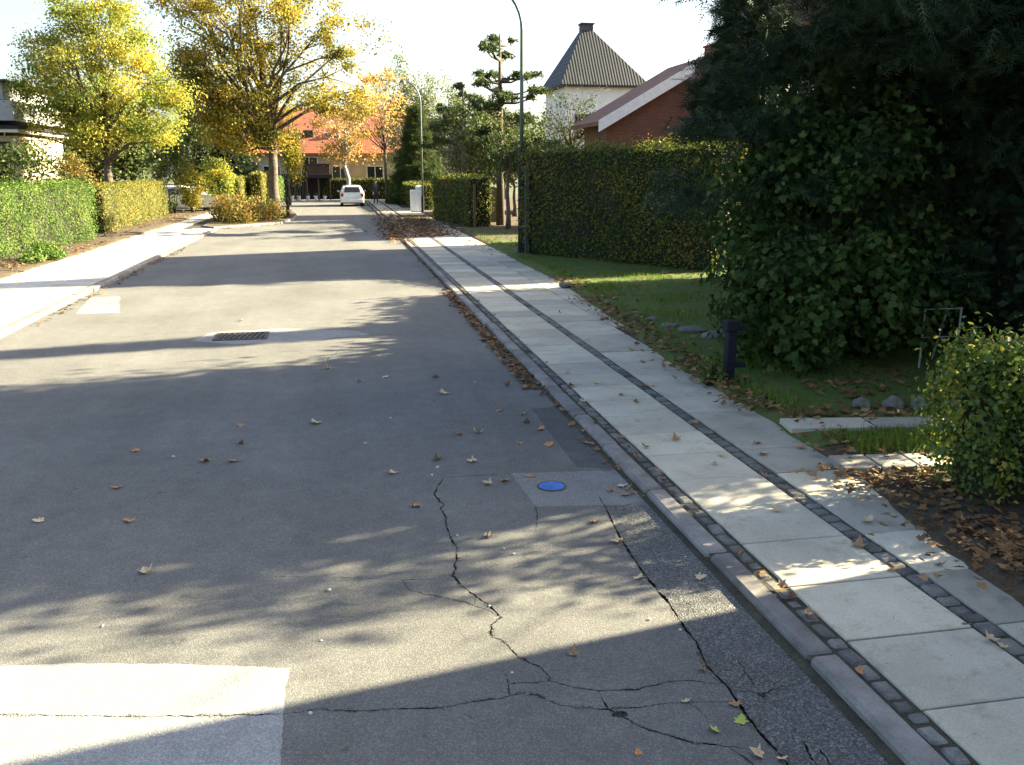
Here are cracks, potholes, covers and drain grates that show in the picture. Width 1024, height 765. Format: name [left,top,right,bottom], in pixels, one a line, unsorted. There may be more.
manhole cover [537,481,567,492]
crack [0,475,752,764]
